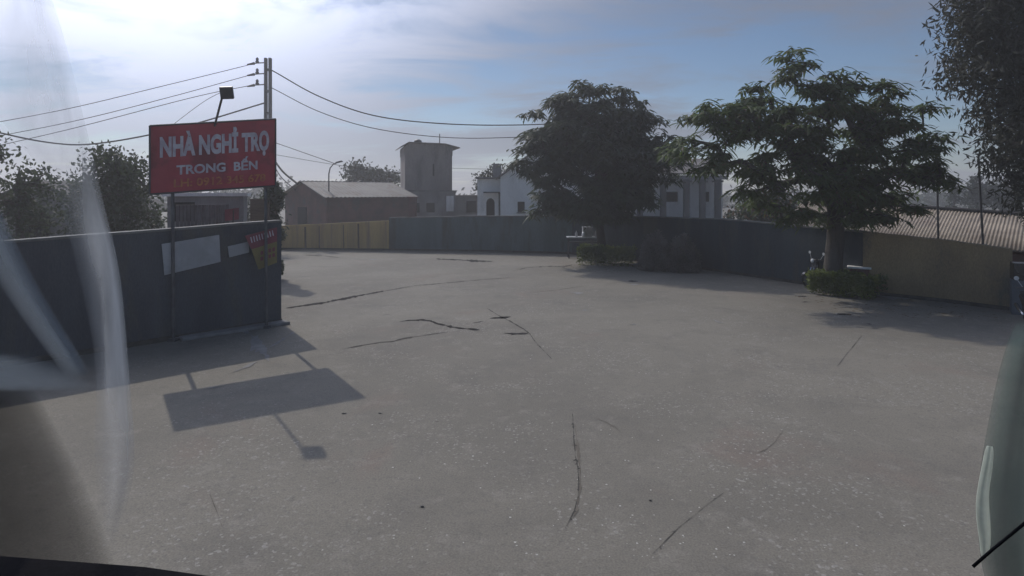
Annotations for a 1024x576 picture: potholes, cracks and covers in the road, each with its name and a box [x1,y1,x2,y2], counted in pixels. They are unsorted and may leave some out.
crack [386,314,528,335]
crack [568,413,582,522]
